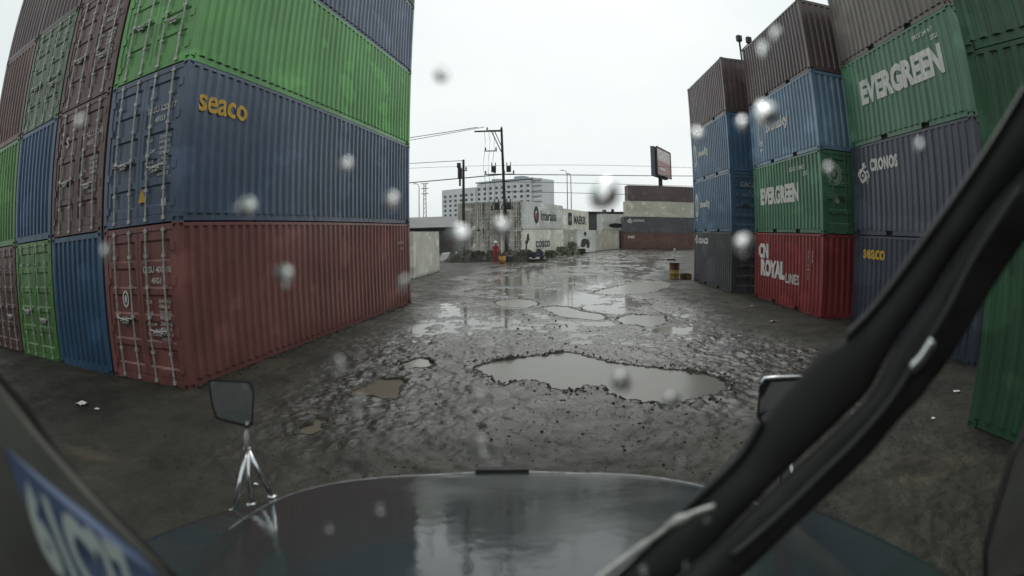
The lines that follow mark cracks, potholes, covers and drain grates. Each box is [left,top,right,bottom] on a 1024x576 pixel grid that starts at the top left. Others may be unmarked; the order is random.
pothole [399,356,437,370]
pothole [540,305,611,320]
pothole [492,298,540,308]
pothole [464,349,744,410]
pothole [592,280,675,295]
pothole [606,313,672,327]
pothole [294,416,331,435]
pothole [342,375,406,400]
